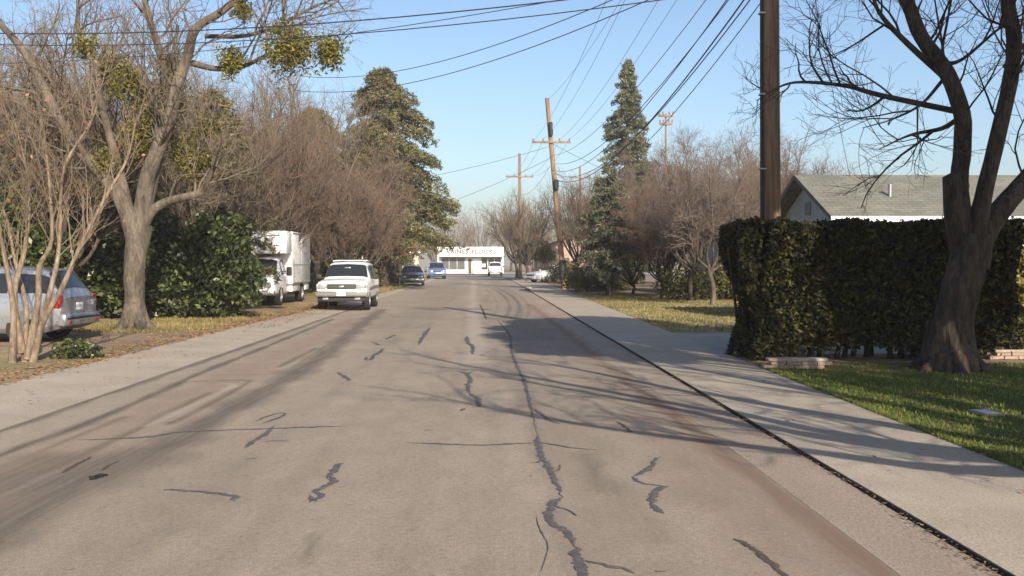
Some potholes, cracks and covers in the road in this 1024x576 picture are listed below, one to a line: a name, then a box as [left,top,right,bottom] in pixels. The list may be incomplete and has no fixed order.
crack [407,442,595,450]
crack [733,538,789,576]
crack [338,335,396,381]
crack [62,412,333,473]
crack [308,462,344,502]
crack [464,305,487,354]
crack [165,489,240,501]
crack [457,371,482,411]
crack [418,327,430,344]
